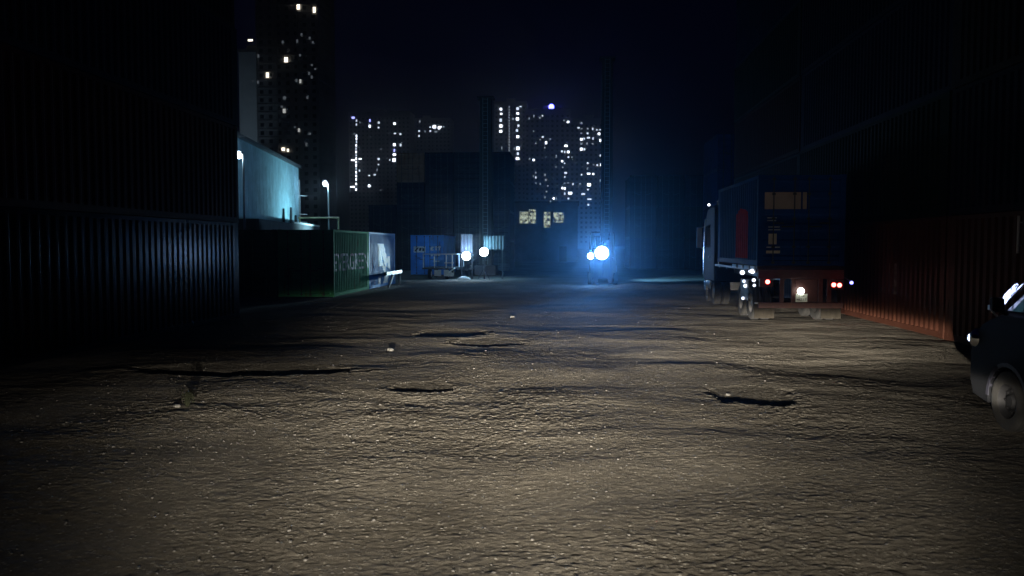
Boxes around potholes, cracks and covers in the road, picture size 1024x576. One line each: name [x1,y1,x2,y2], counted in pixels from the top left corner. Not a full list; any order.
pothole [387,380,457,393]
pothole [410,328,495,337]
pothole [700,383,810,408]
pothole [442,337,531,347]
